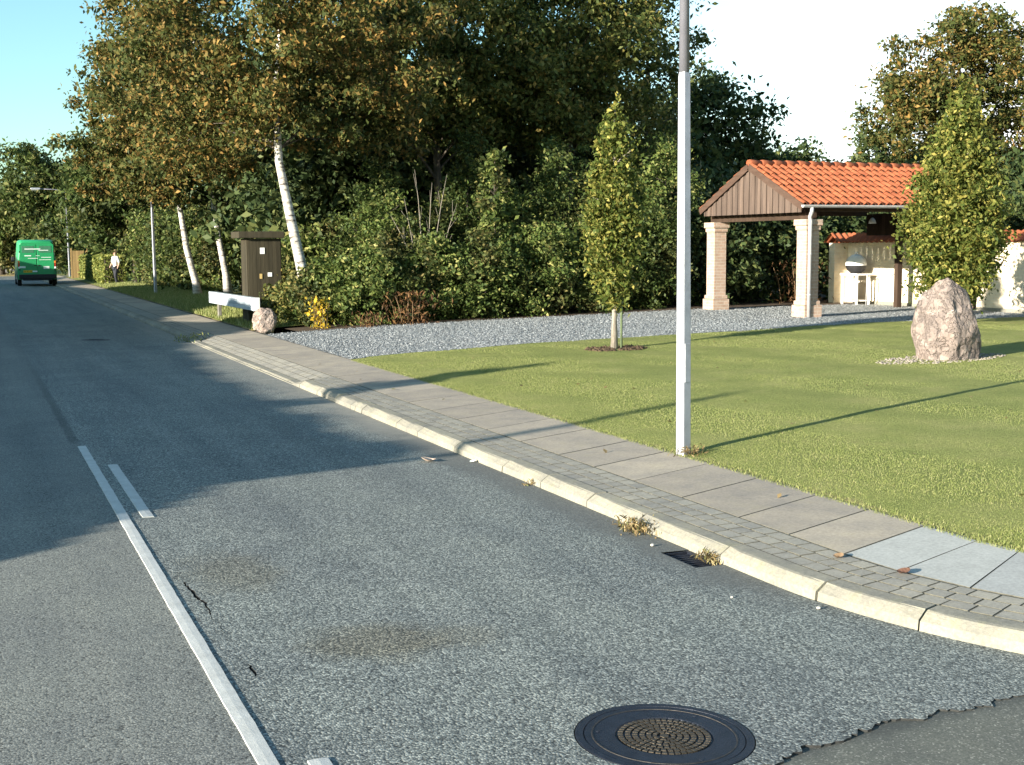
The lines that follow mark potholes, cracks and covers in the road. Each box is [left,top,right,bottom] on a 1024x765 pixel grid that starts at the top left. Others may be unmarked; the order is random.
manhole cover [575,704,755,765]
crack [183,582,257,676]
drain grate [663,551,722,568]
